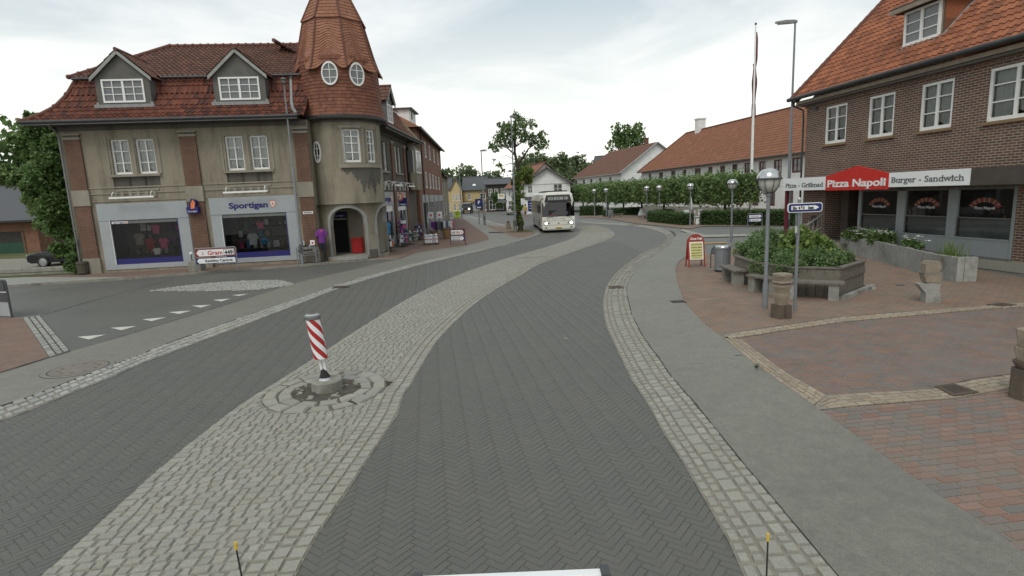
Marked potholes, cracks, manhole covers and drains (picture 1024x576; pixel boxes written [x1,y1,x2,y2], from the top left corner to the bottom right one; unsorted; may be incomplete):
manhole cover [39,359,116,379]
